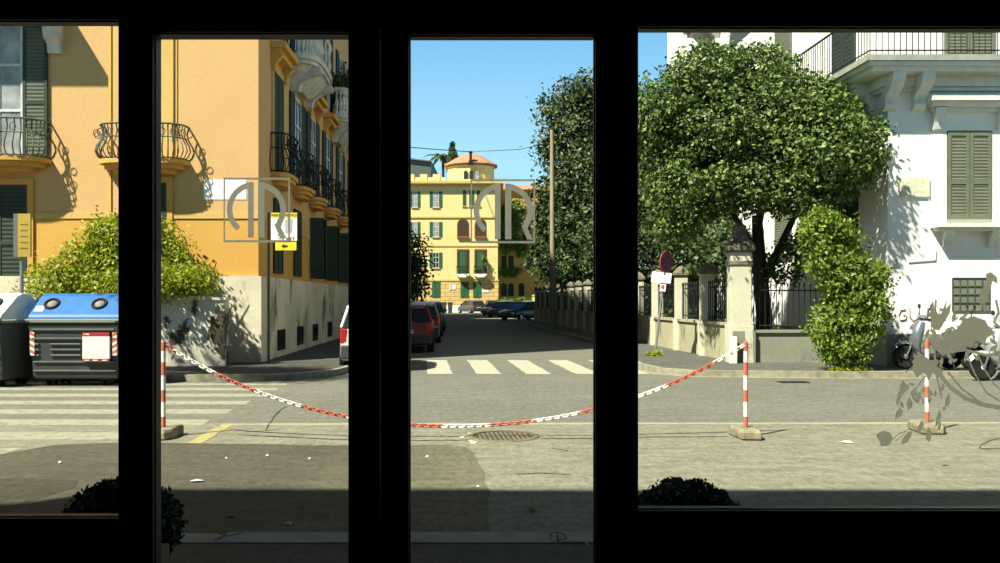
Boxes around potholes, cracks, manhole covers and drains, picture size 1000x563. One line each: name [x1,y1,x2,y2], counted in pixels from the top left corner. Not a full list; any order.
crack [238,406,425,441]
